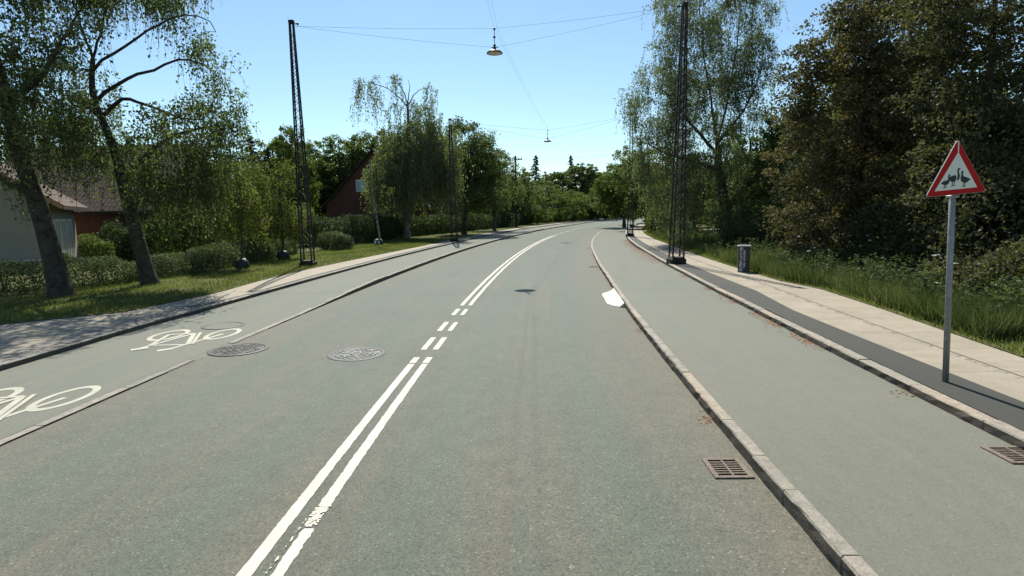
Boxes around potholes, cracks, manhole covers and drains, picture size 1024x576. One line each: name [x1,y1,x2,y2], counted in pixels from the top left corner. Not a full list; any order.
manhole cover [327,347,386,361]
drain grate [701,458,755,479]
manhole cover [201,322,245,330]
manhole cover [207,343,269,357]
drain grate [980,446,1024,464]
